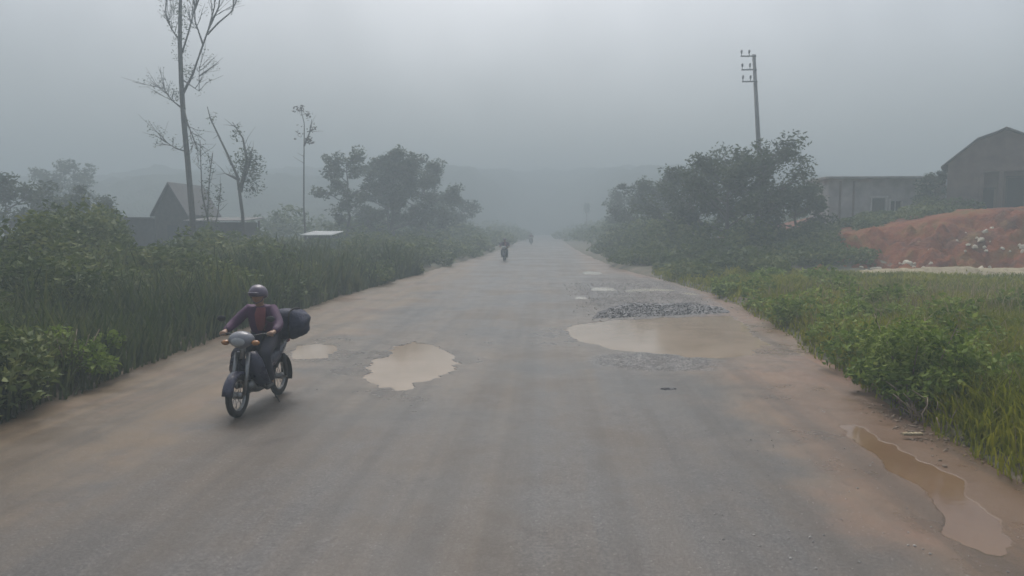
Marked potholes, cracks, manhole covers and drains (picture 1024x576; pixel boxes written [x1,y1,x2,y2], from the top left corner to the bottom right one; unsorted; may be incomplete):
pothole [564,316,771,358]
pothole [362,341,463,391]
pothole [291,344,339,359]
